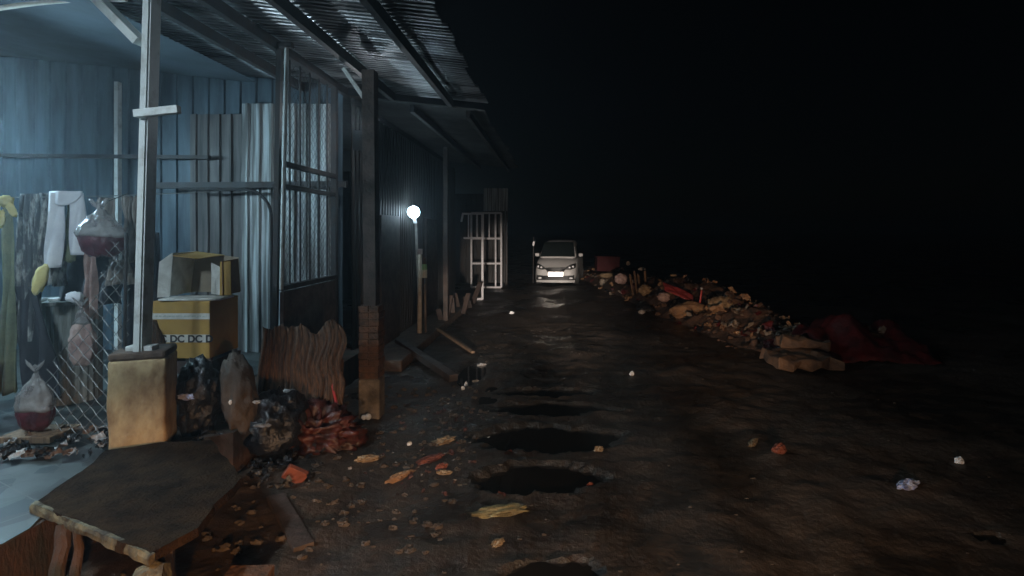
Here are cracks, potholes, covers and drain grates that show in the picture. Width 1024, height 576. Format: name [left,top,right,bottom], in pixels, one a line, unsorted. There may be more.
pothole [490,556,607,576]
pothole [489,386,602,398]
pothole [463,459,624,496]
pothole [480,400,637,417]
pothole [456,421,640,455]
